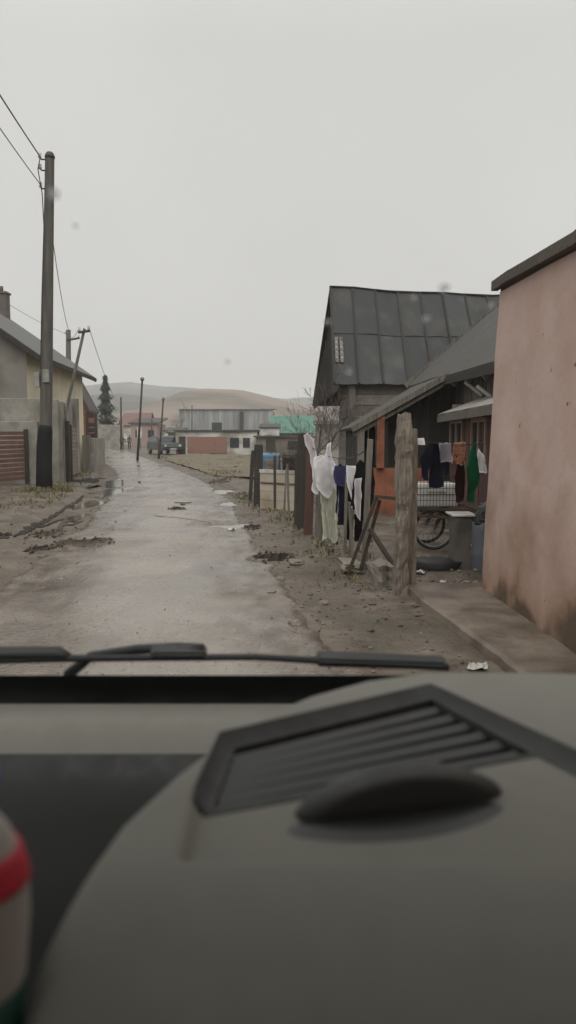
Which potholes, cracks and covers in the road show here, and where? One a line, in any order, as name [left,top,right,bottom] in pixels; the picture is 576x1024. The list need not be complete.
pothole [248,550,295,565]
pothole [18,543,63,554]
pothole [48,536,115,550]
